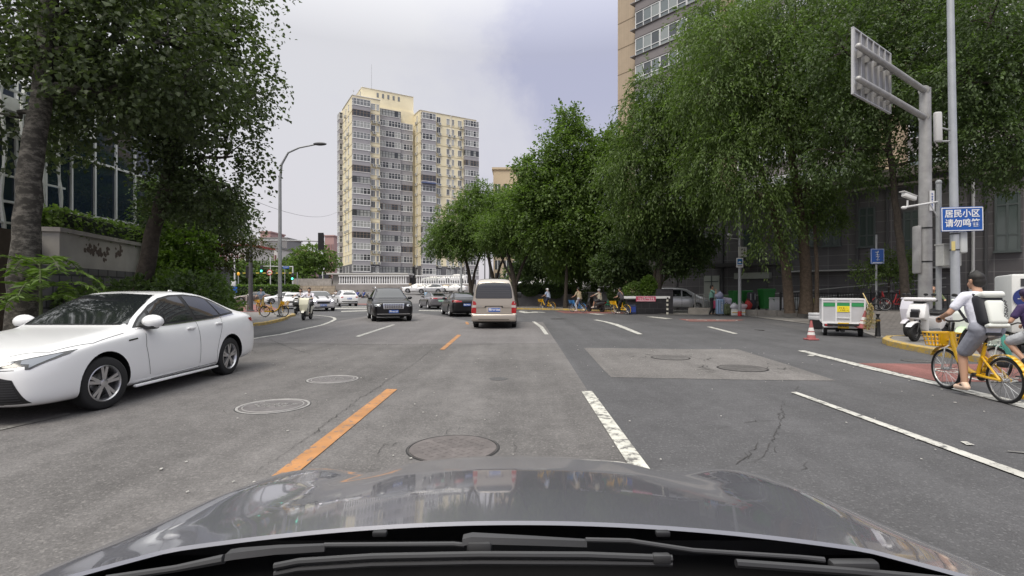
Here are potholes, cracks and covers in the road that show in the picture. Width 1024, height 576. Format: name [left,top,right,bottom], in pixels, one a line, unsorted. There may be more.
manhole cover [405,435,500,461]
manhole cover [305,375,359,384]
manhole cover [234,399,311,414]
crack [620,351,798,464]
